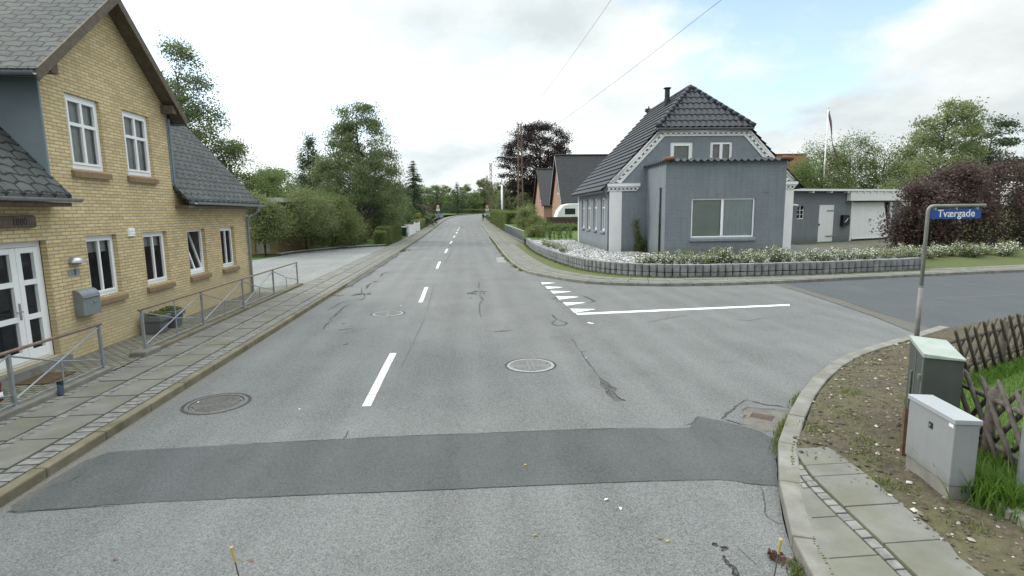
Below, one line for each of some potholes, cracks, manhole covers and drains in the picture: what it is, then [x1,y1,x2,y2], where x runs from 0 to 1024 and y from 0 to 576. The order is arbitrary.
manhole cover [180,393,252,415]
crack [466,281,510,332]
manhole cover [505,358,557,373]
drain grate [748,412,776,422]
crack [323,272,397,345]
crack [551,296,617,378]
